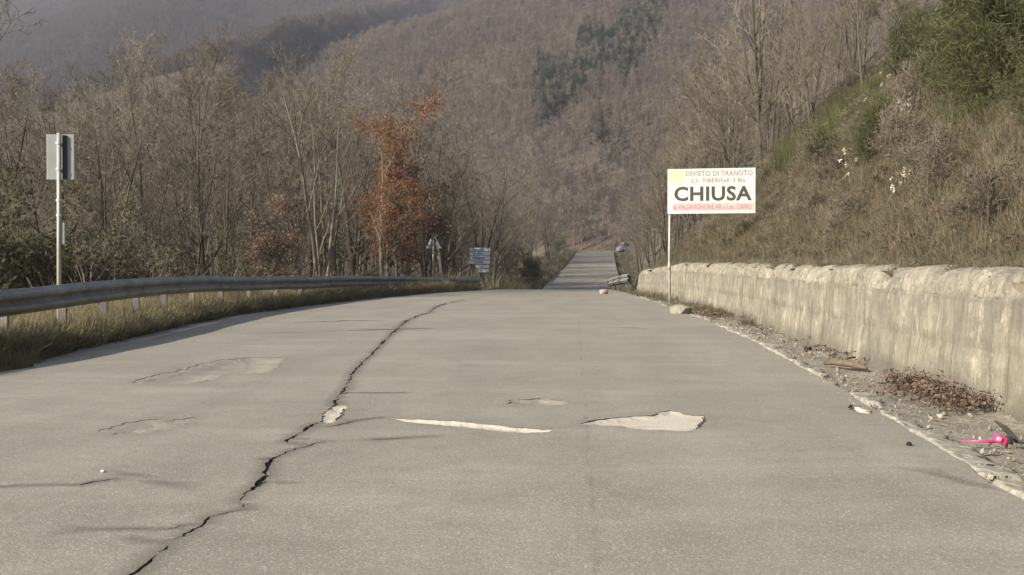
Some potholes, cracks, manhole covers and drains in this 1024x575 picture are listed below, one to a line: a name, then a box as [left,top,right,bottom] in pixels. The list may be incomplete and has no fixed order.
pothole [320,405,348,423]
crack [121,300,461,575]
